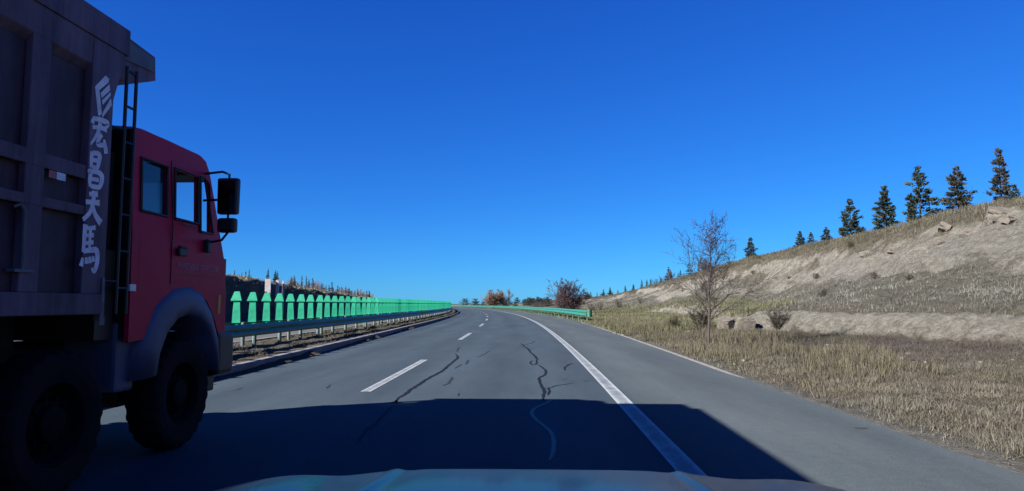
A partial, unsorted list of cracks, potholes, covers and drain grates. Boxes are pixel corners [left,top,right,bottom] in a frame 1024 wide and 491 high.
crack [389,347,489,403]
crack [520,341,574,401]
